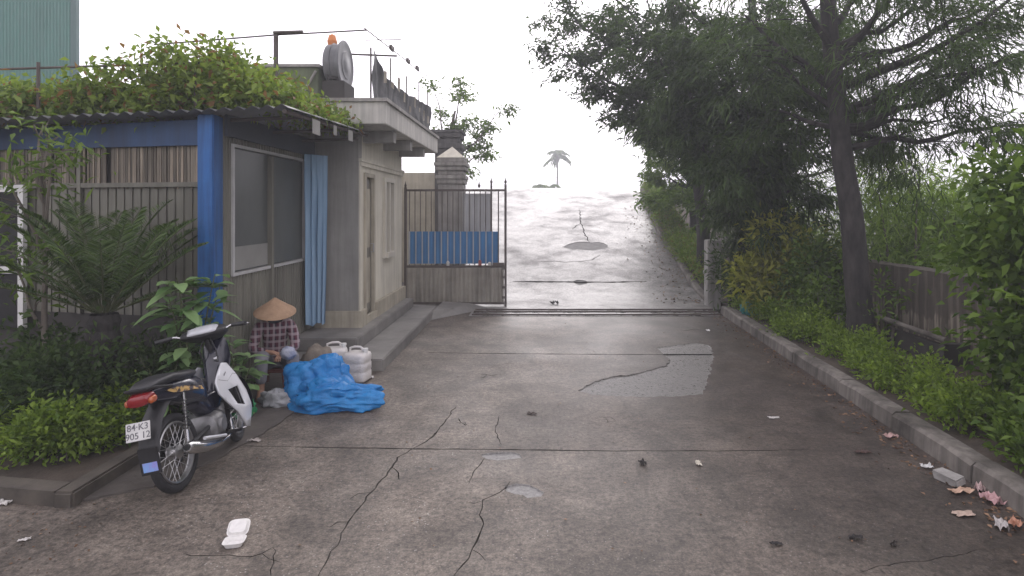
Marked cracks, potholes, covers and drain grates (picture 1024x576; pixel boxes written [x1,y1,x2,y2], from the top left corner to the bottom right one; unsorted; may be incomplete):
crack [186,547,281,574]
crack [318,407,467,576]
crack [454,459,510,575]
crack [862,549,985,572]
